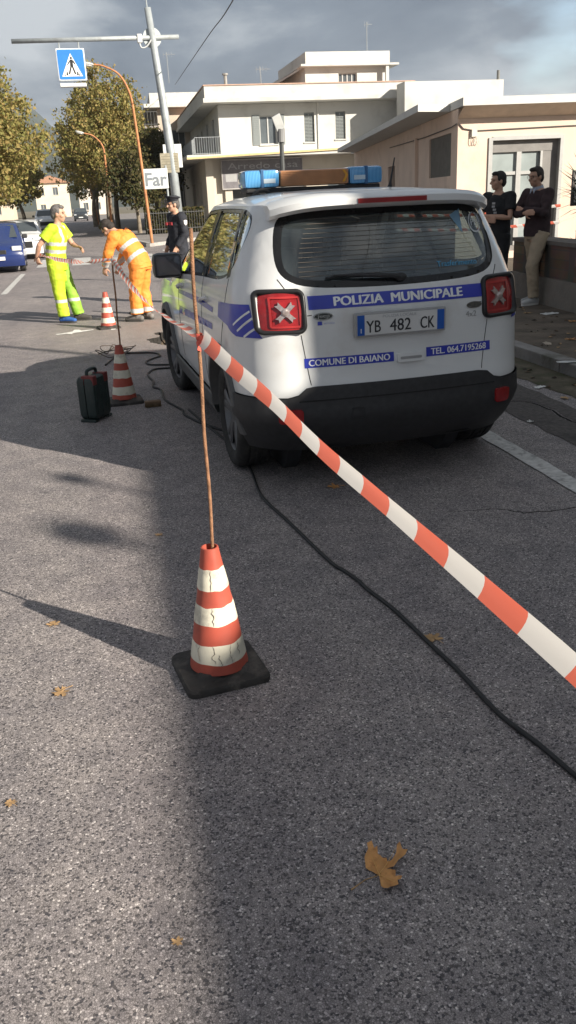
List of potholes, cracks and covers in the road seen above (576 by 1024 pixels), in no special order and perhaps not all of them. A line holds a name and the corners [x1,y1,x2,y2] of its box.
crack [511,401,576,423]
